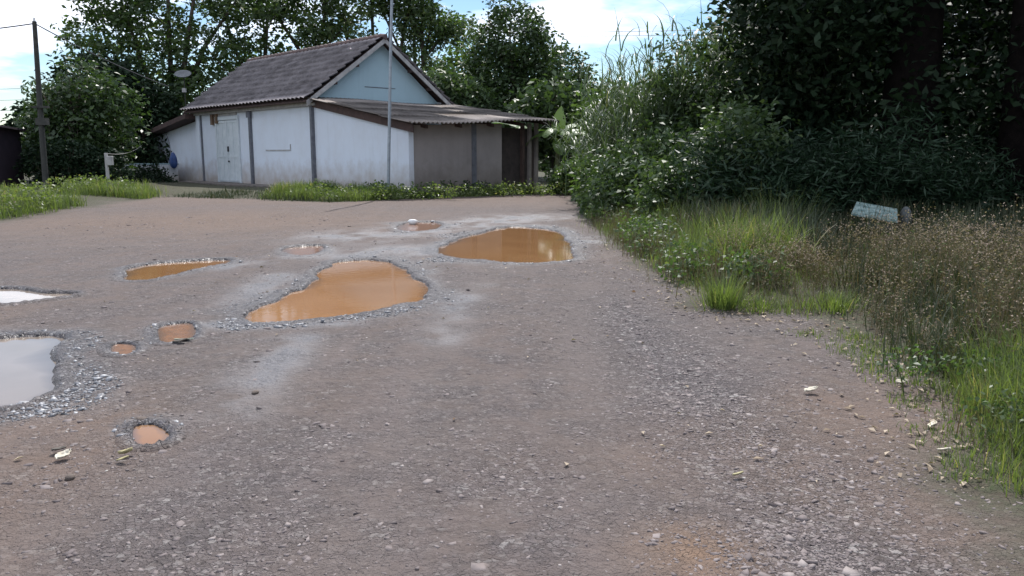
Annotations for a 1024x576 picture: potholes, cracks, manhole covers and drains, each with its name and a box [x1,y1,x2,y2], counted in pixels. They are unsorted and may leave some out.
pothole [0,285,92,306]
pothole [96,339,150,358]
pothole [385,220,453,233]
pothole [226,257,442,326]
pothole [109,257,243,282]
pothole [270,243,337,257]
pothole [425,225,588,265]
pothole [0,331,82,412]
pothole [114,418,188,452]
pothole [142,319,211,346]
